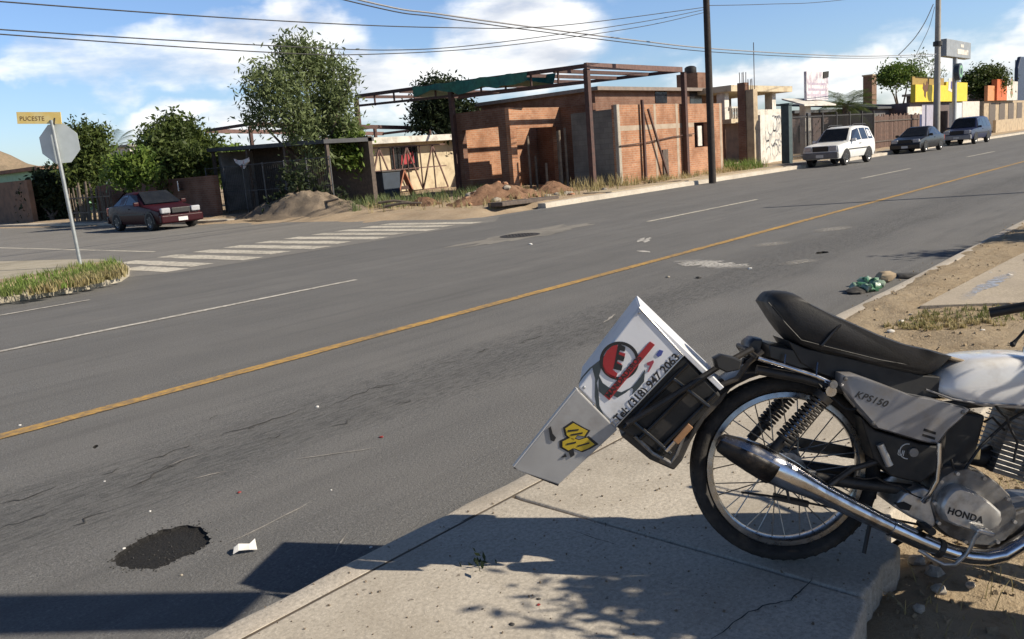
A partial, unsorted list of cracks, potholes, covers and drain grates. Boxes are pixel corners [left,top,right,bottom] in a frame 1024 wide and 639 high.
crack [332,384,411,426]
pothole [110,525,212,569]
crack [713,580,812,638]
crack [208,408,306,438]
crack [102,446,195,489]
crack [0,485,58,528]
